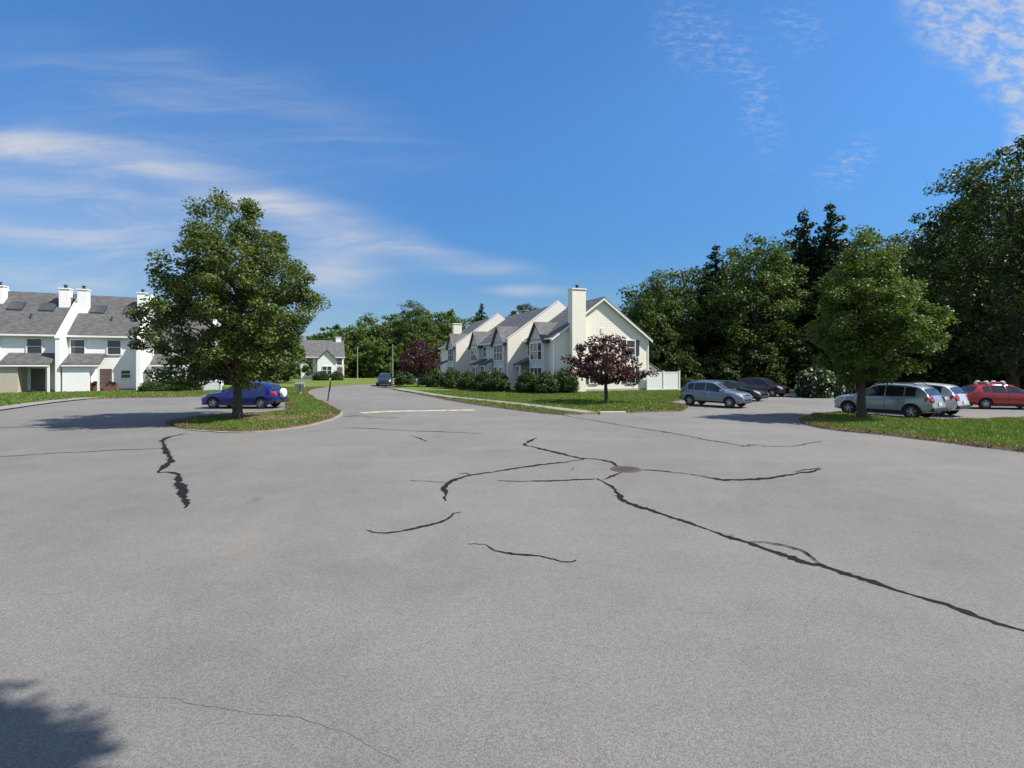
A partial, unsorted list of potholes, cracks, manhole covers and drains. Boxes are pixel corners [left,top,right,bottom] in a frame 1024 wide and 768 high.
crack [345,415,481,441]
crack [563,415,821,447]
crack [90,689,408,768]
